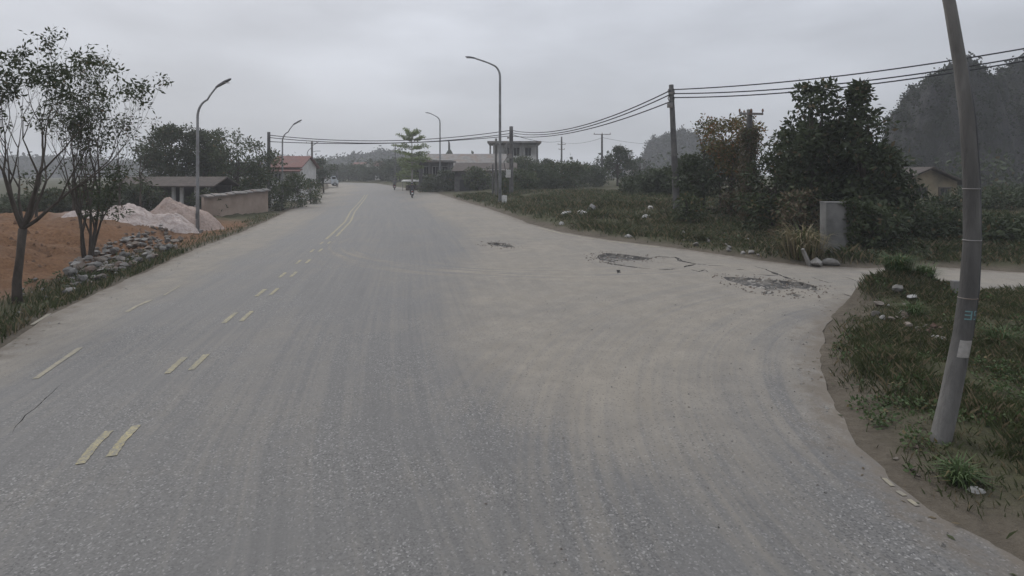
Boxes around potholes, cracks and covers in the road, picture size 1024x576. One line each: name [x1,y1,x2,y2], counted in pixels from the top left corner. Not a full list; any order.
crack [608,256,714,272]
pothole [596,253,650,262]
pothole [723,277,818,291]
